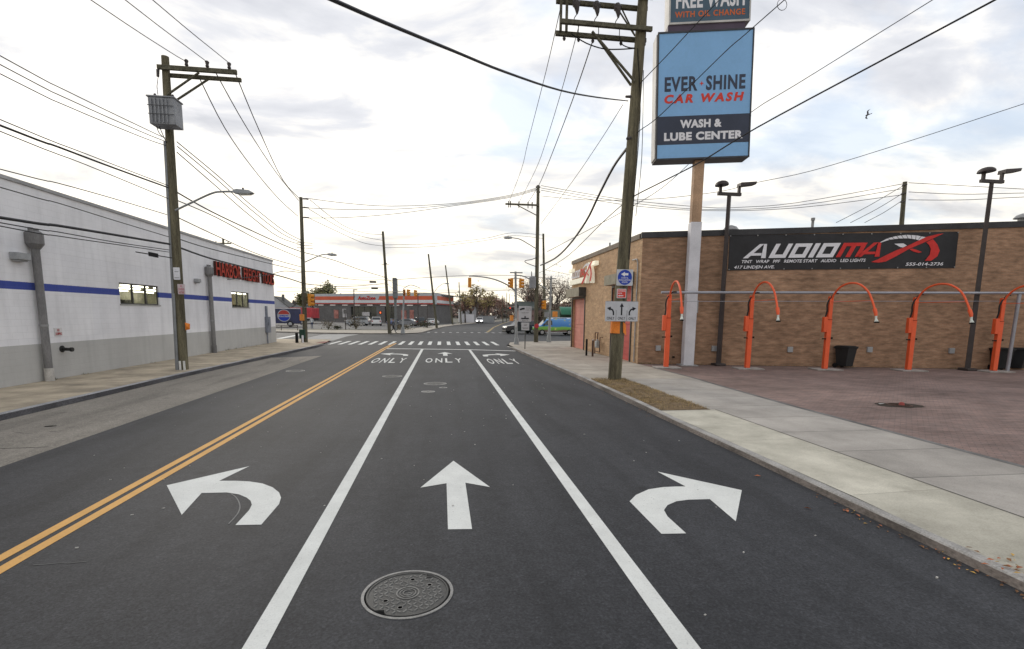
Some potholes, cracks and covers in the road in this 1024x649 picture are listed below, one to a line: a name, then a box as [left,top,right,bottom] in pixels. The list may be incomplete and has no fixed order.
manhole cover [361,570,453,620]
